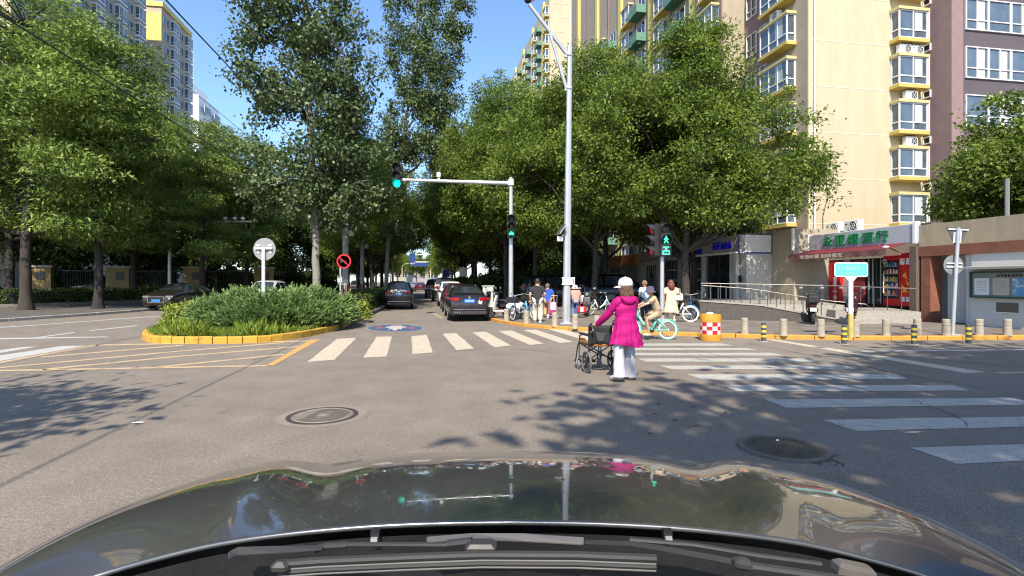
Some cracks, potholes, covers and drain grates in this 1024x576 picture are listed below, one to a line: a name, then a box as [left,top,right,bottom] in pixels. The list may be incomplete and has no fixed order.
manhole cover [276,405,367,427]
manhole cover [736,434,832,463]
